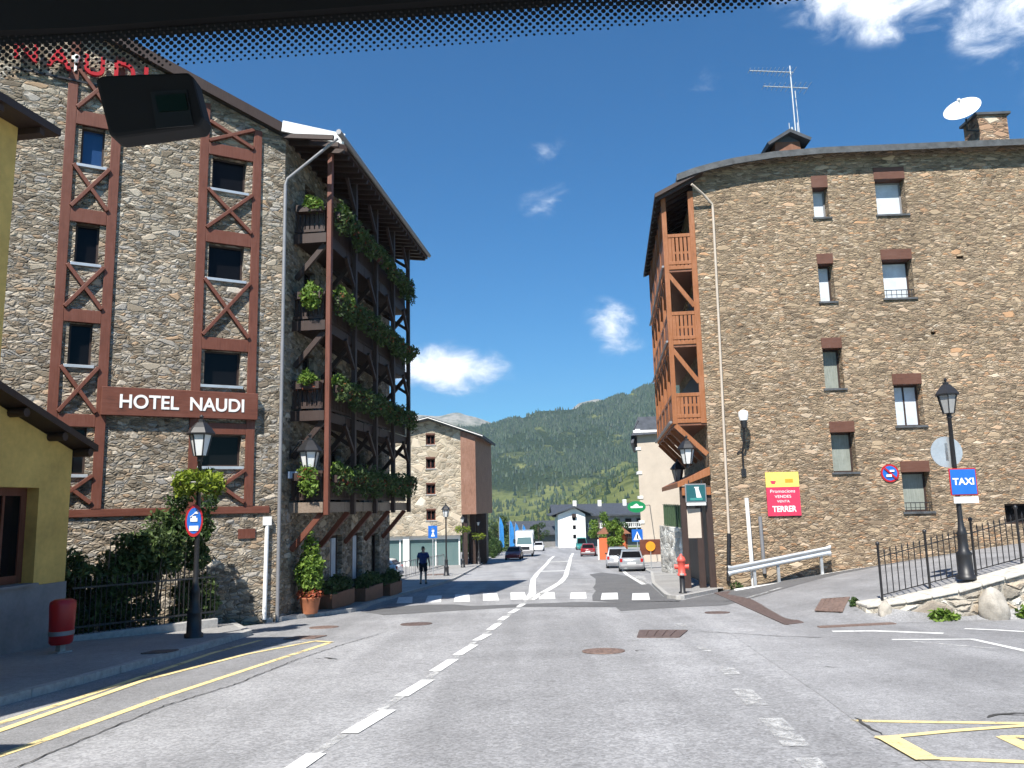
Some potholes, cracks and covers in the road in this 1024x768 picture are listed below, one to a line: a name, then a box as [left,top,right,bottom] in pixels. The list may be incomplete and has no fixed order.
drain grate [715,591,804,625]
manhole cover [815,597,850,613]
